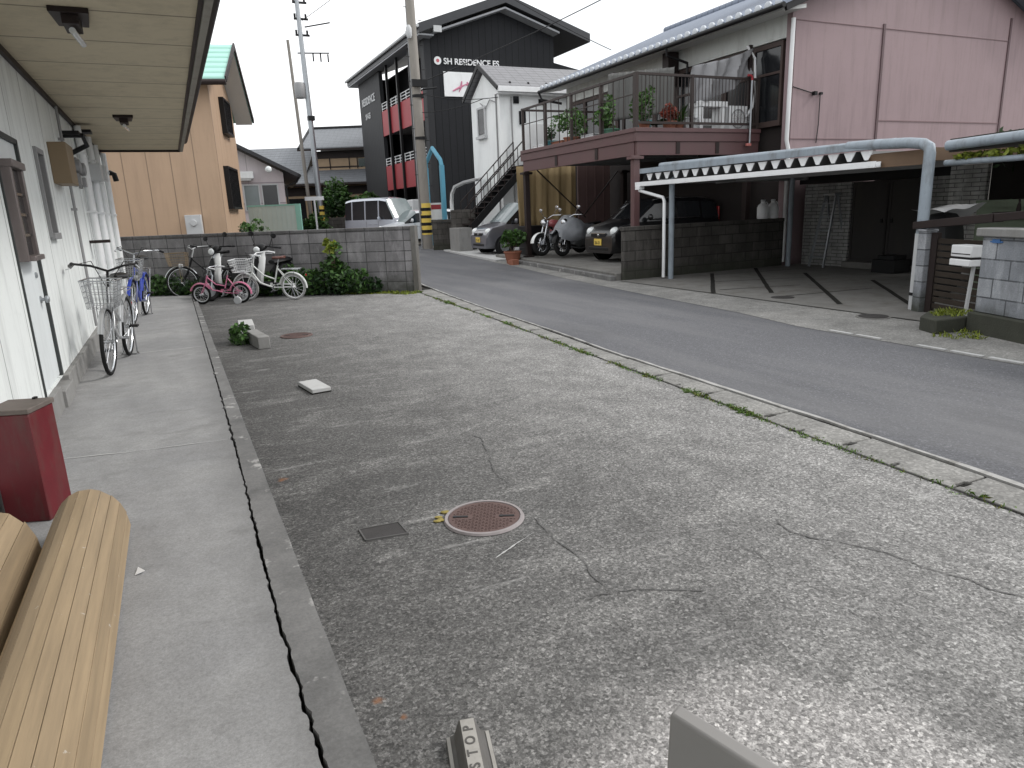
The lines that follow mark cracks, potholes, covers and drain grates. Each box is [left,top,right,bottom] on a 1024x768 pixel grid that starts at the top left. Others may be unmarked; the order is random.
crack [473,435,510,485]
manhole cover [433,500,525,536]
crack [776,519,1022,596]
crack [524,512,702,600]
crack [194,306,324,768]
manhole cover [358,521,409,542]
